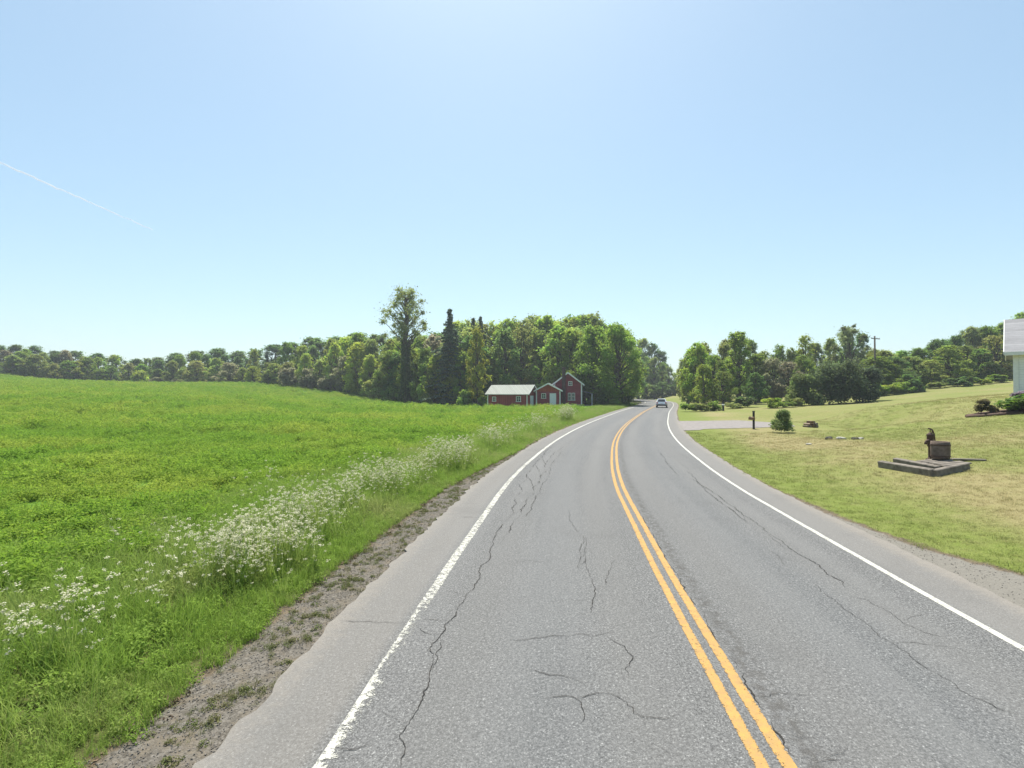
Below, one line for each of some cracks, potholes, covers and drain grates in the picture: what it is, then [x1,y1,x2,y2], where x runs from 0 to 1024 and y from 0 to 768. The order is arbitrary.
crack [533,669,669,721]
crack [507,632,633,676]
crack [566,517,616,610]
crack [688,472,1013,713]
crack [342,446,561,760]
